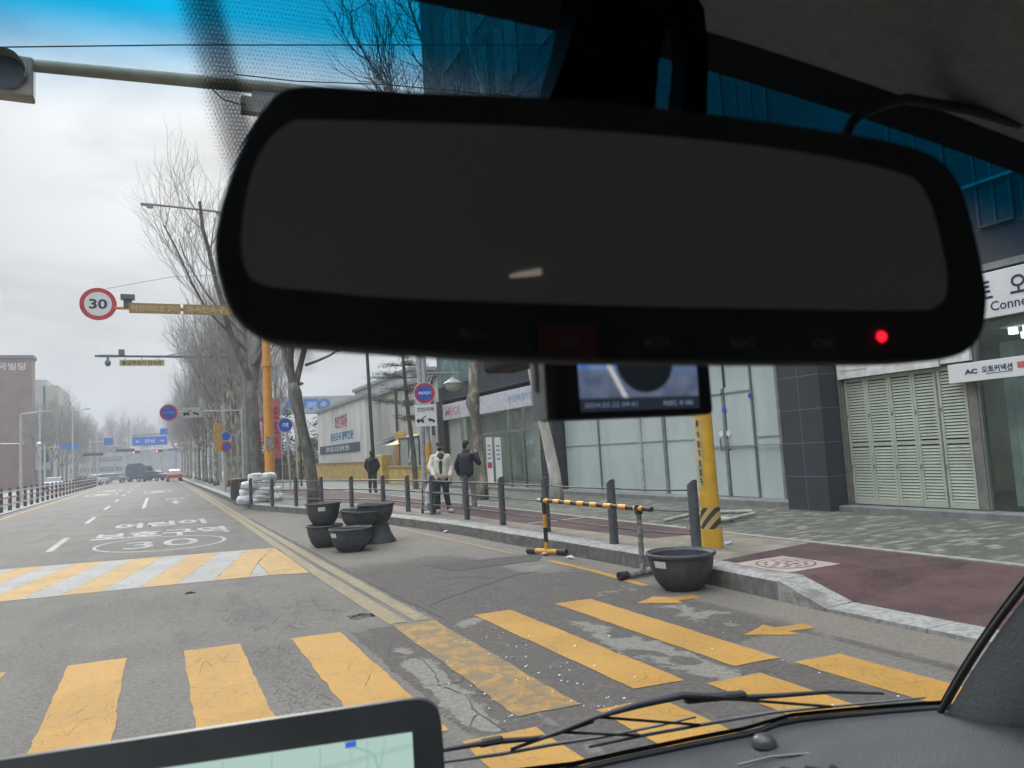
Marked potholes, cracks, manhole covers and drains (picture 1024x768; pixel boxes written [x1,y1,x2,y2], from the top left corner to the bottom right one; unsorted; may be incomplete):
crack [388,641,508,733]
pothole [172,589,207,598]
pothole [331,610,381,626]
crack [221,584,354,714]
manhole cover [733,556,840,573]
